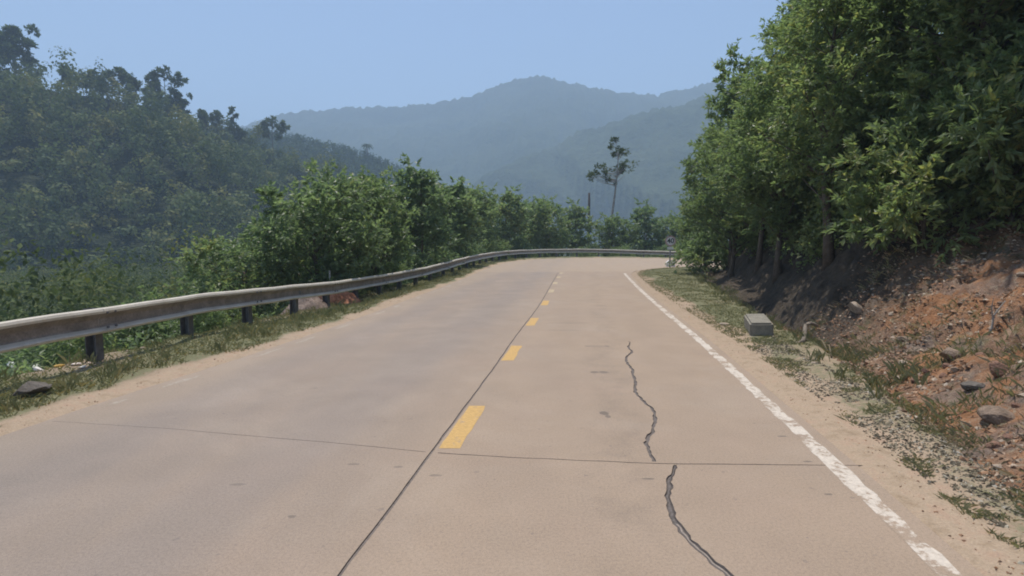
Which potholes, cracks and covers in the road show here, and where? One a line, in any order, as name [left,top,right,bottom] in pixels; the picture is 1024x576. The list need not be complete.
crack [625,342,734,576]
